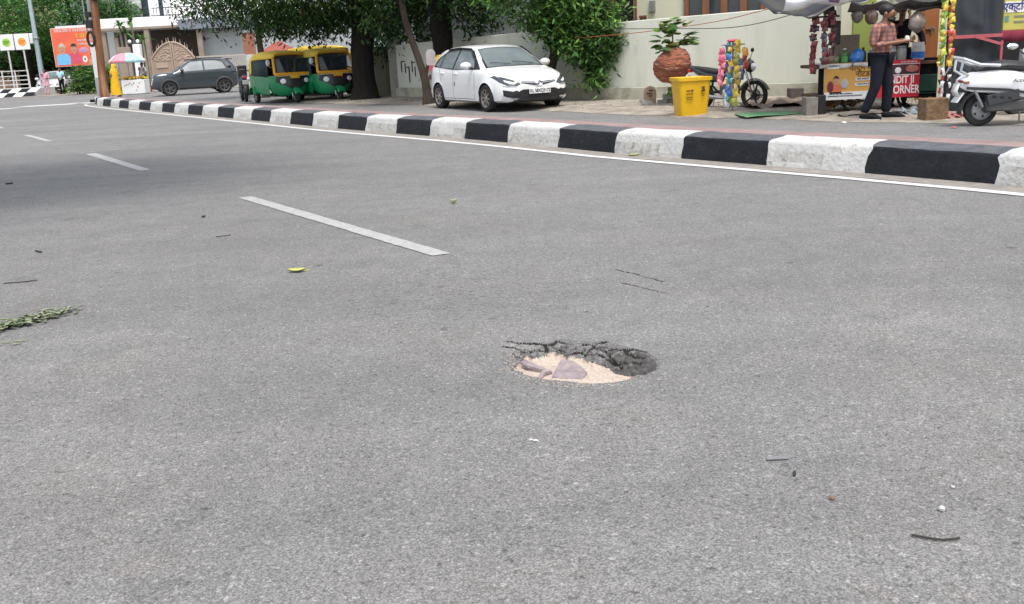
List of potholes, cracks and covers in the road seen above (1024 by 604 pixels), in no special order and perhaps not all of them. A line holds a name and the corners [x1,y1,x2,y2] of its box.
pothole [488,339,662,388]
crack [615,269,669,294]
